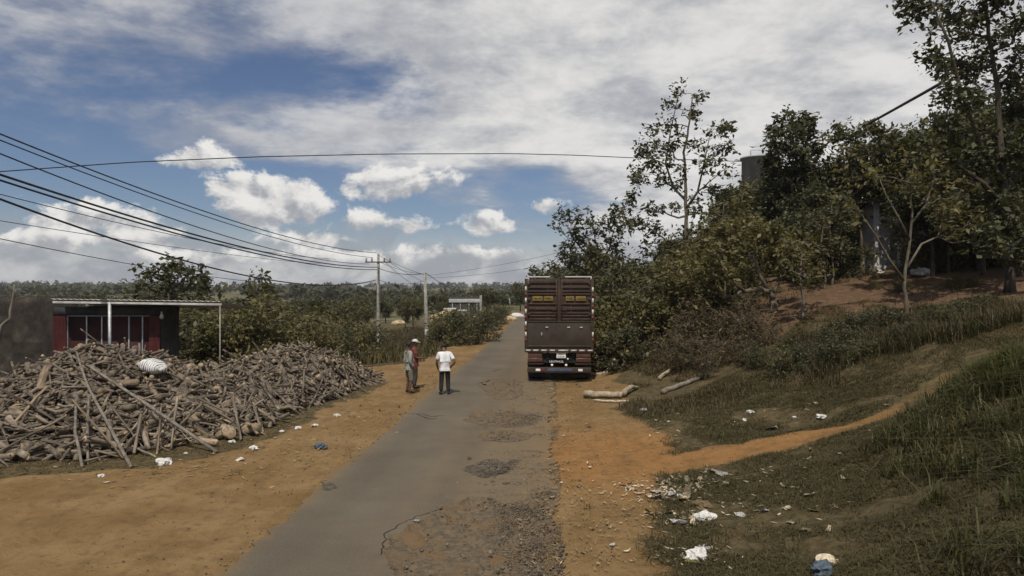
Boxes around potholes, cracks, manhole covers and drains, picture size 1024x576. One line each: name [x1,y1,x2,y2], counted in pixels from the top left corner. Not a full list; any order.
pothole [464,409,547,428]
pothole [477,430,533,442]
crack [381,509,442,554]
pothole [477,379,525,400]
pothole [462,459,520,478]
pothole [384,491,566,576]
